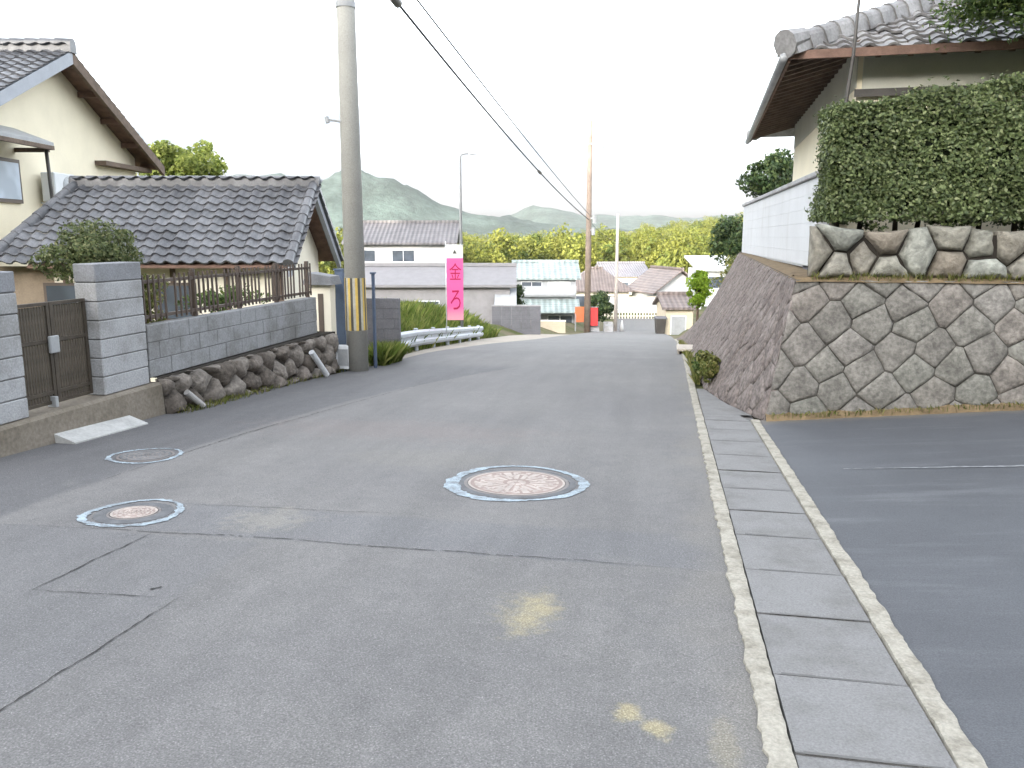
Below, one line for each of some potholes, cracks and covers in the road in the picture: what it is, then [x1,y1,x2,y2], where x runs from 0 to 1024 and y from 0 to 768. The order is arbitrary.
manhole cover [116,450,175,462]
manhole cover [458,469,577,499]
manhole cover [92,502,174,524]
